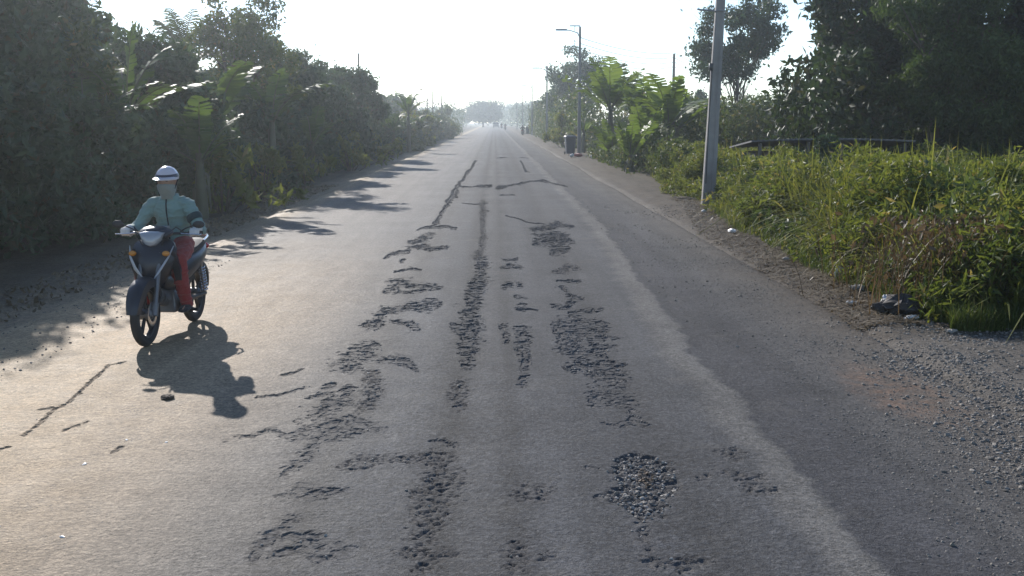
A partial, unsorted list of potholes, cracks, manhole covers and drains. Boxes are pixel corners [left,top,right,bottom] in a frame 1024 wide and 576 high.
pothole [546,312,634,380]
crack [0,360,134,454]
pothole [439,375,476,413]
pothole [386,542,463,576]
pothole [546,285,609,314]
pothole [495,322,540,389]
pothole [291,381,372,421]
pothole [268,451,318,480]
pothole [266,480,356,502]
pothole [372,352,425,373]
pothole [527,220,578,257]
